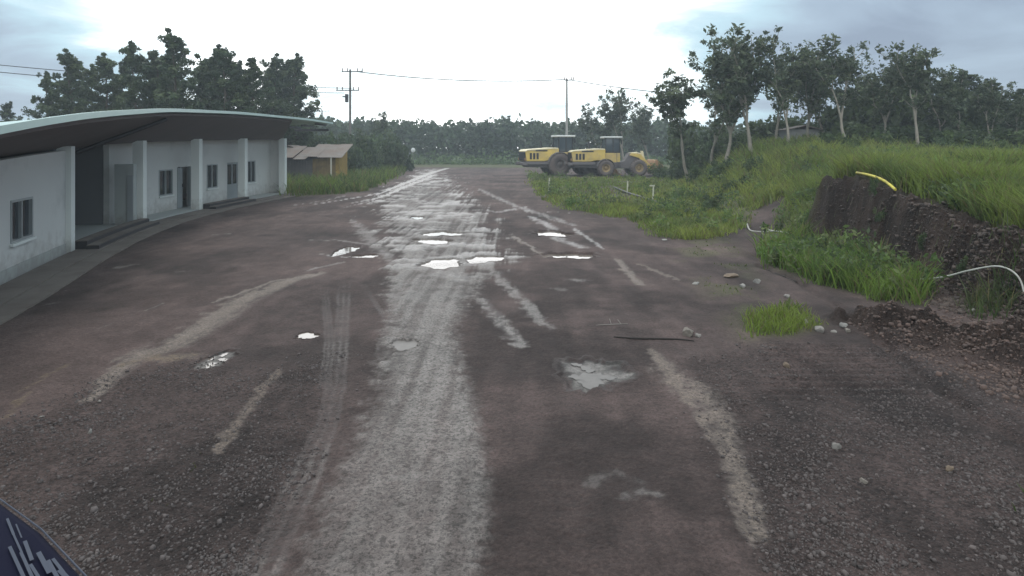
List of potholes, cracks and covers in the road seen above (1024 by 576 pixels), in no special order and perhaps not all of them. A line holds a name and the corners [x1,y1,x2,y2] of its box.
pothole [386,337,423,352]
pothole [528,229,581,238]
pothole [405,237,459,246]
pothole [411,256,467,270]
pothole [459,254,512,264]
pothole [412,229,473,237]
pothole [551,355,644,396]
pothole [528,251,604,260]
pothole [293,330,323,340]
pothole [184,347,243,372]
pothole [327,245,364,258]
